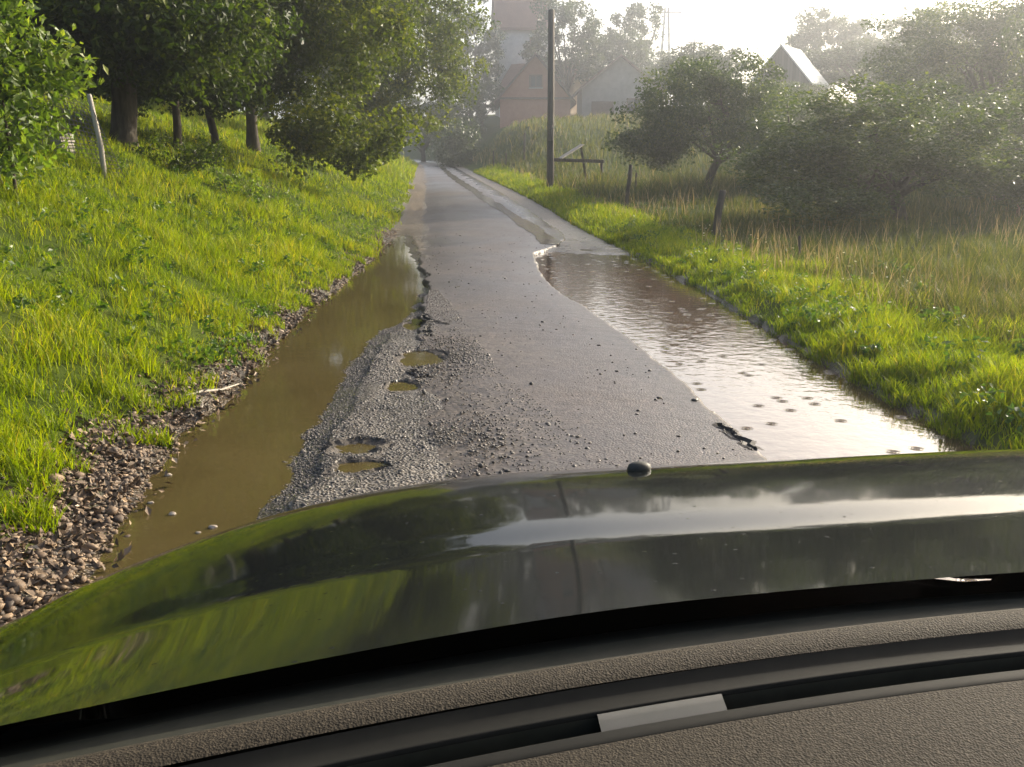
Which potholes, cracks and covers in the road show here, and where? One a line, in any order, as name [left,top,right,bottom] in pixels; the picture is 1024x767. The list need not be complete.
crack [712,423,765,451]
pothole [316,434,394,462]
pothole [321,457,406,476]
pothole [392,346,448,372]
pothole [382,377,422,393]
